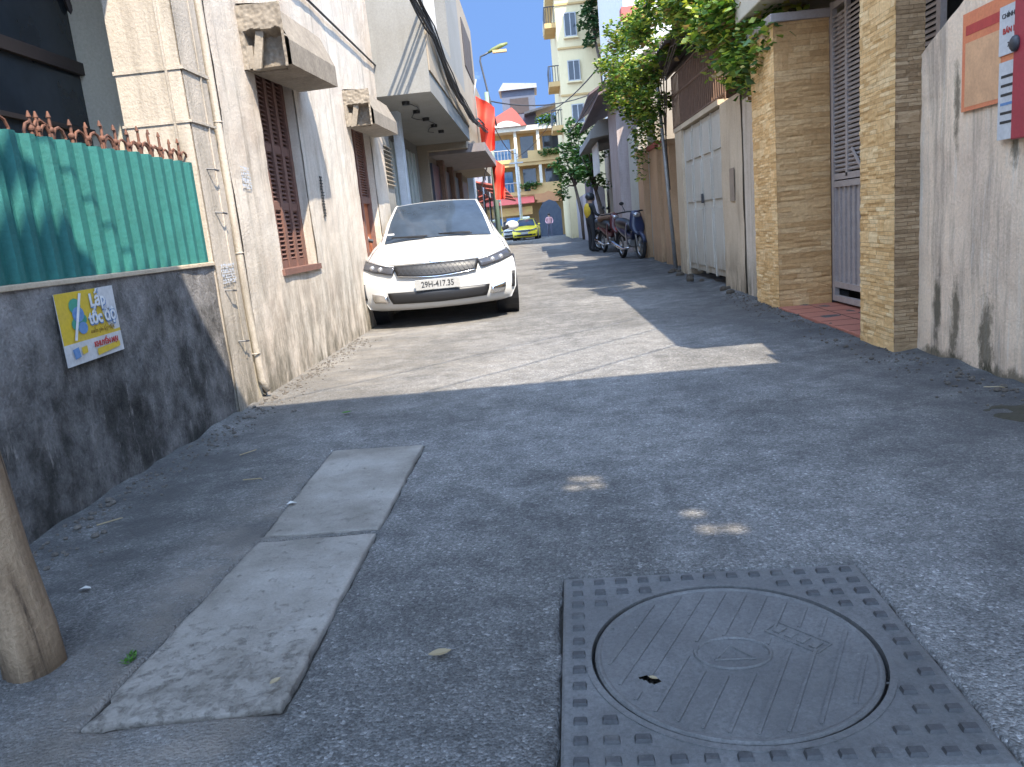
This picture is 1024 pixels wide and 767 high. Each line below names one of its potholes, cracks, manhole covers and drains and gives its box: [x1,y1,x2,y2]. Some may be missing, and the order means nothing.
manhole cover [561,564,1022,767]
